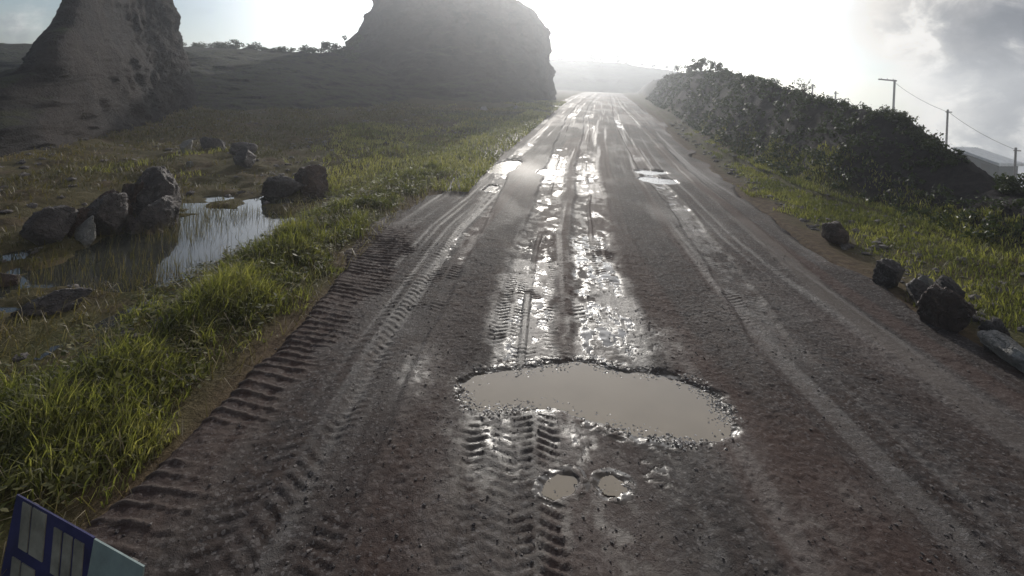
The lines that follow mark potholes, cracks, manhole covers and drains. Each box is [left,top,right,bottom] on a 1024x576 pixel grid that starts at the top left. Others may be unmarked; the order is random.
pothole [635,176,681,185]
pothole [531,464,591,509]
pothole [588,467,638,507]
pothole [443,351,749,454]
